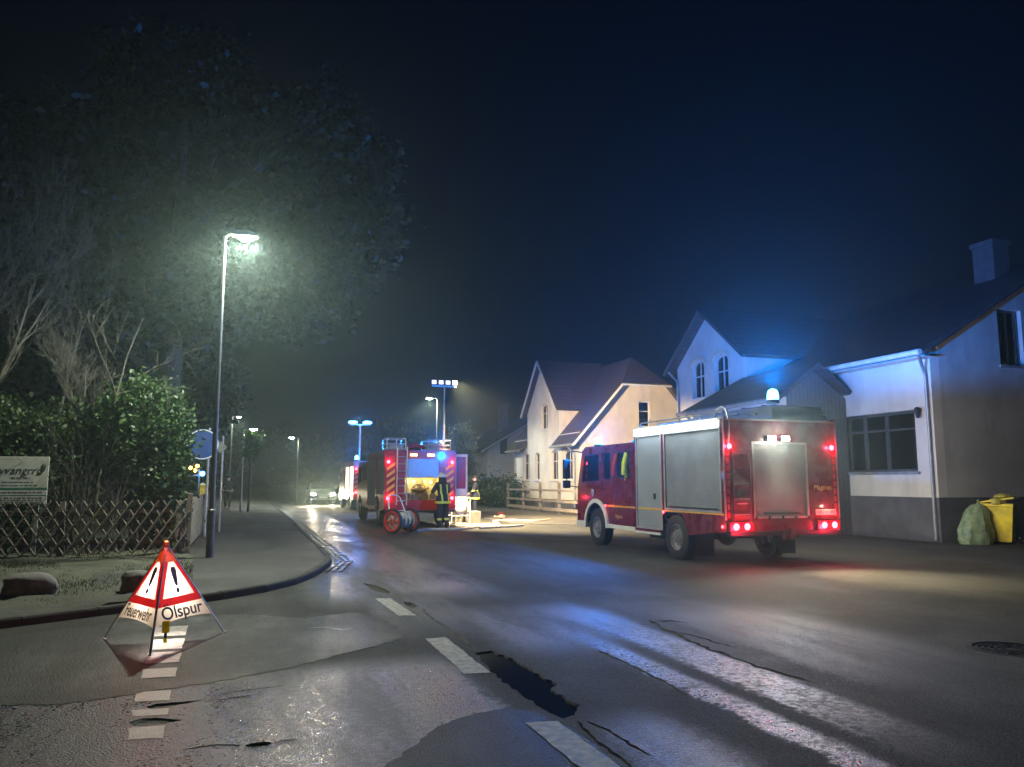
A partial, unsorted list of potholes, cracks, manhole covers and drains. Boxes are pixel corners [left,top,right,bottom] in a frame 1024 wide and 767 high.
manhole cover [966,641,1024,657]
crack [183,739,295,750]
pothole [364,583,390,594]
pothole [129,718,179,726]
pothole [475,651,580,718]
crack [599,620,820,695]
crack [577,721,652,767]
